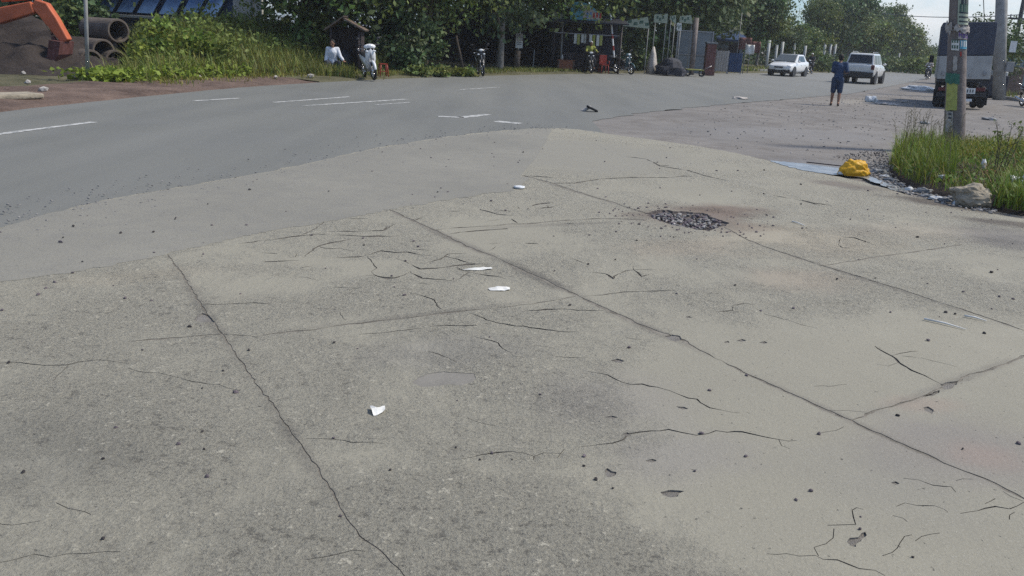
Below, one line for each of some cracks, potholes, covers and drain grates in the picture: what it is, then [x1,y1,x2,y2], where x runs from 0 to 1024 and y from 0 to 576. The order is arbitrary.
crack [211,203,736,413]
crack [875,346,956,385]
crack [582,429,797,449]
pothole [847,532,867,547]
crack [774,478,1024,576]
